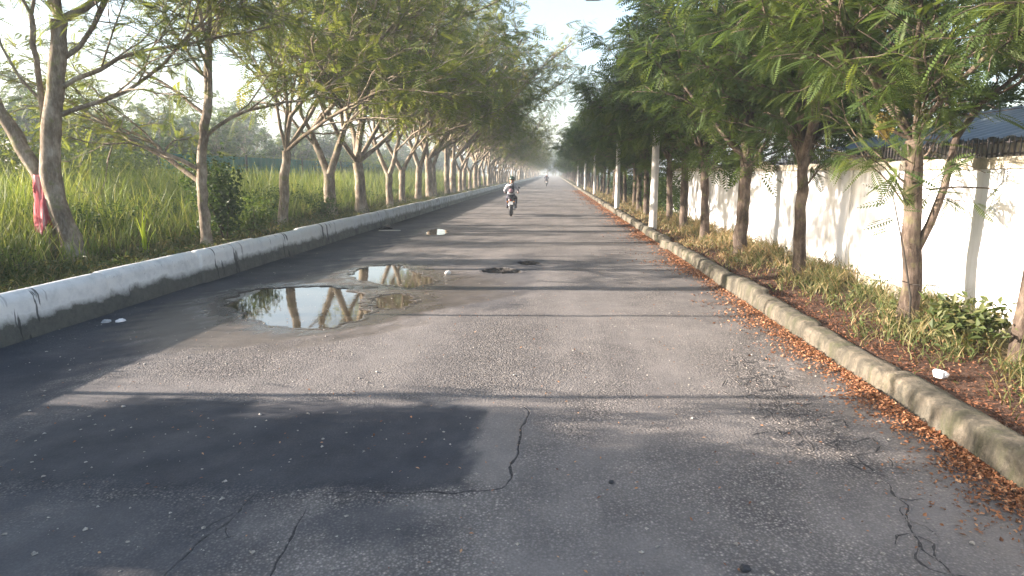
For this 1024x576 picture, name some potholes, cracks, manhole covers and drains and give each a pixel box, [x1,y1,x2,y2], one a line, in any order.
pothole [476,267,526,275]
crack [159,403,534,576]
pothole [357,292,422,310]
pothole [216,285,379,330]
crack [705,355,968,576]
pothole [422,228,453,236]
pothole [342,264,441,289]
